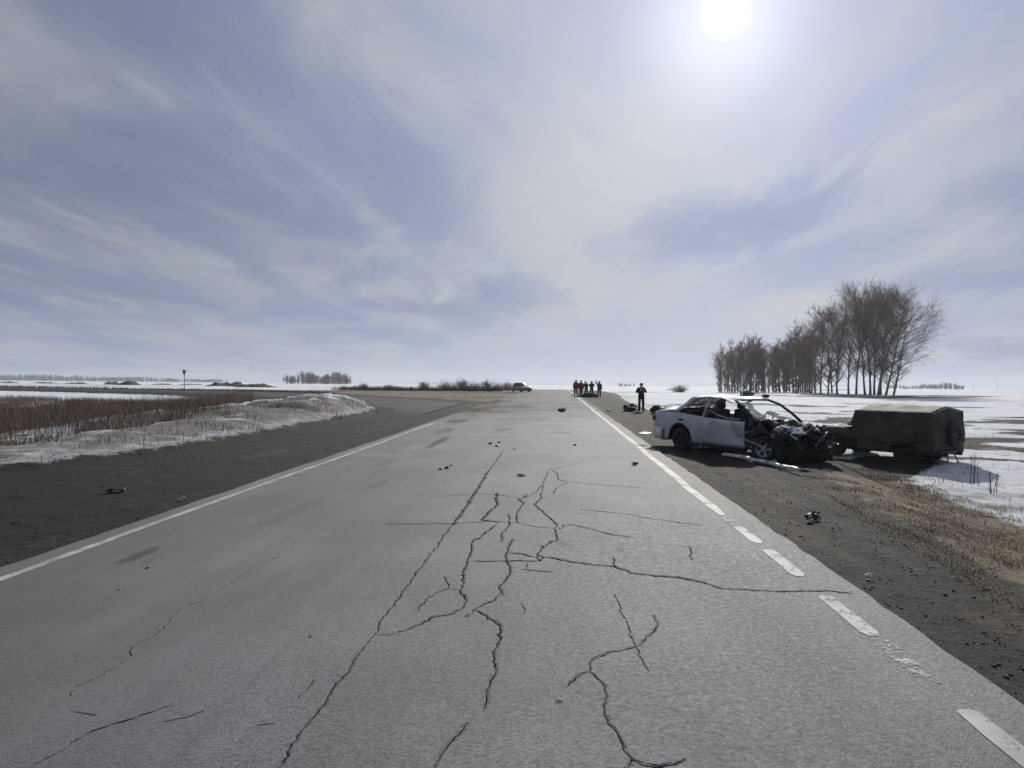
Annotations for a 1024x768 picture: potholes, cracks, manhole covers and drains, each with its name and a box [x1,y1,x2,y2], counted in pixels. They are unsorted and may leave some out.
crack [31,562,265,768]
crack [279,451,846,768]
